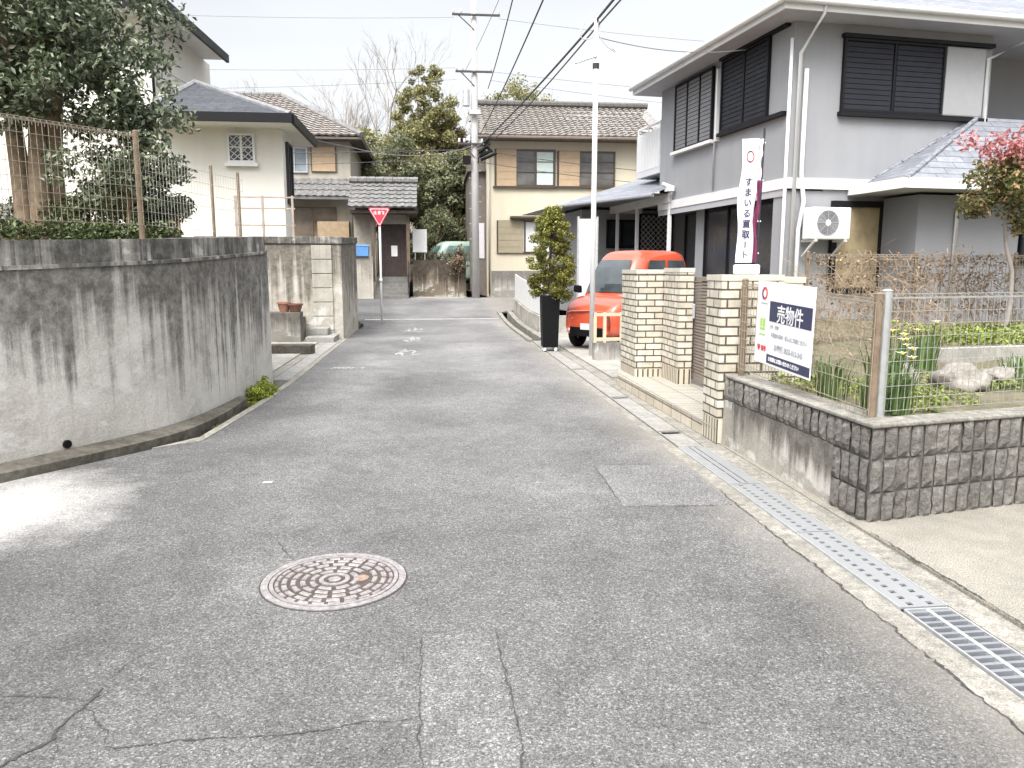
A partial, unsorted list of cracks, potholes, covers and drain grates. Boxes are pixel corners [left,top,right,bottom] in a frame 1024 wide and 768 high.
crack [0,627,424,768]
manhole cover [258,553,408,612]
drain grate [904,607,1024,700]
